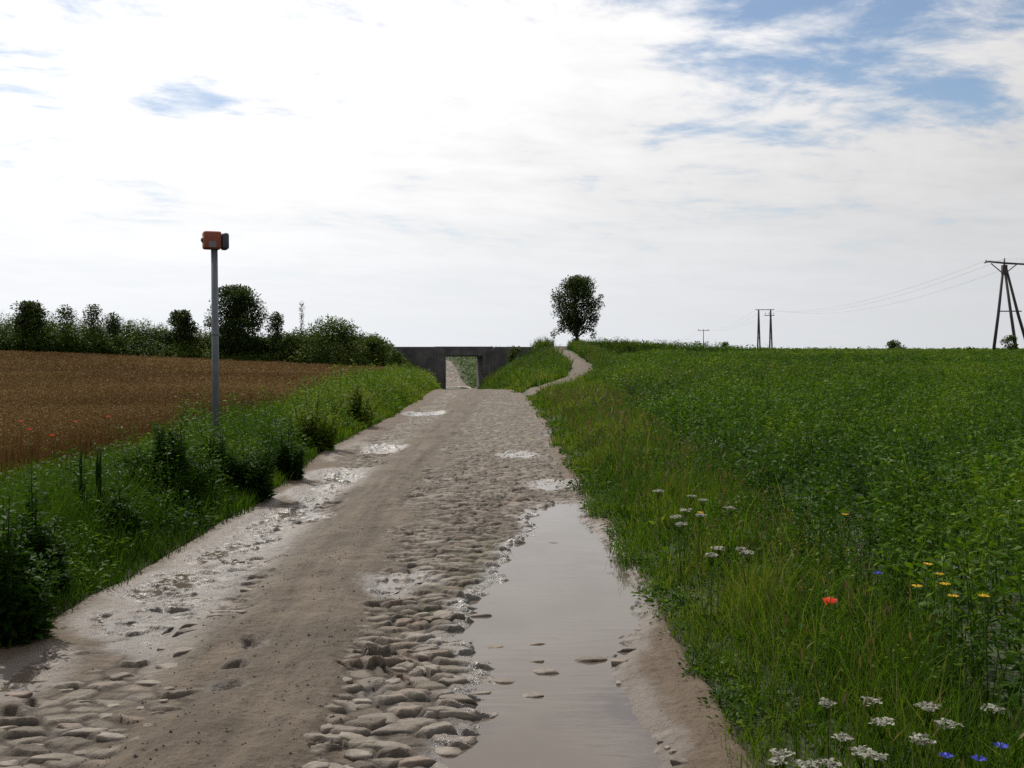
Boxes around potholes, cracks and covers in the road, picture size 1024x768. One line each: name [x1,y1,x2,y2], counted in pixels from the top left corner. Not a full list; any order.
pothole [324,474,360,483]
pothole [367,444,403,454]
pothole [432,500,685,768]
pothole [529,479,582,490]
